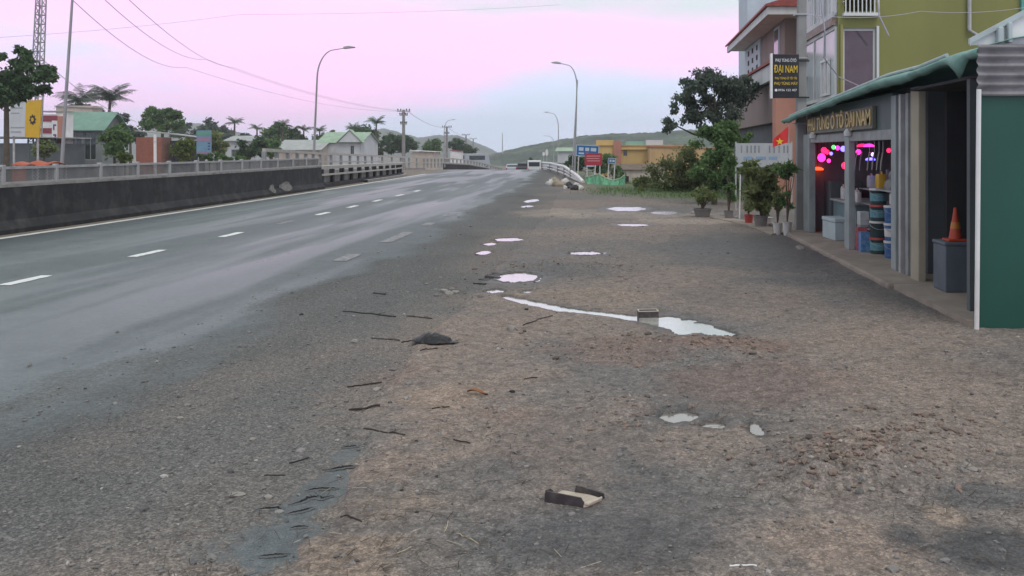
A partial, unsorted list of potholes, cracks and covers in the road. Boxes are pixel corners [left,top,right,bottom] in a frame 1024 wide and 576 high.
pothole [478,271,542,284]
